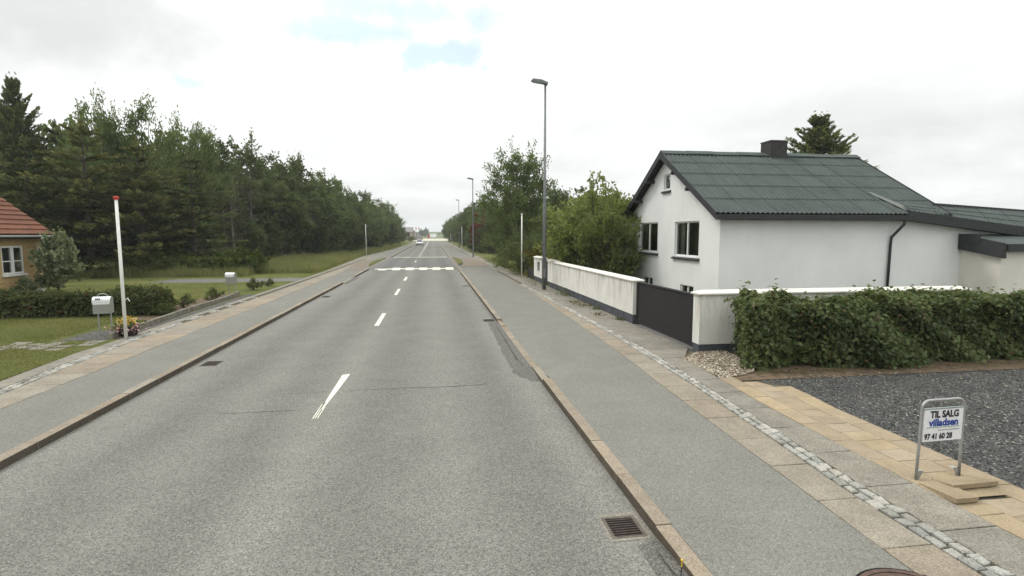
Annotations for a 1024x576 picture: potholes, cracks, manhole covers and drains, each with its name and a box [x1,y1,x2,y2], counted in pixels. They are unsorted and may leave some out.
manhole cover [856,568,926,576]
drain grate [600,515,648,539]
